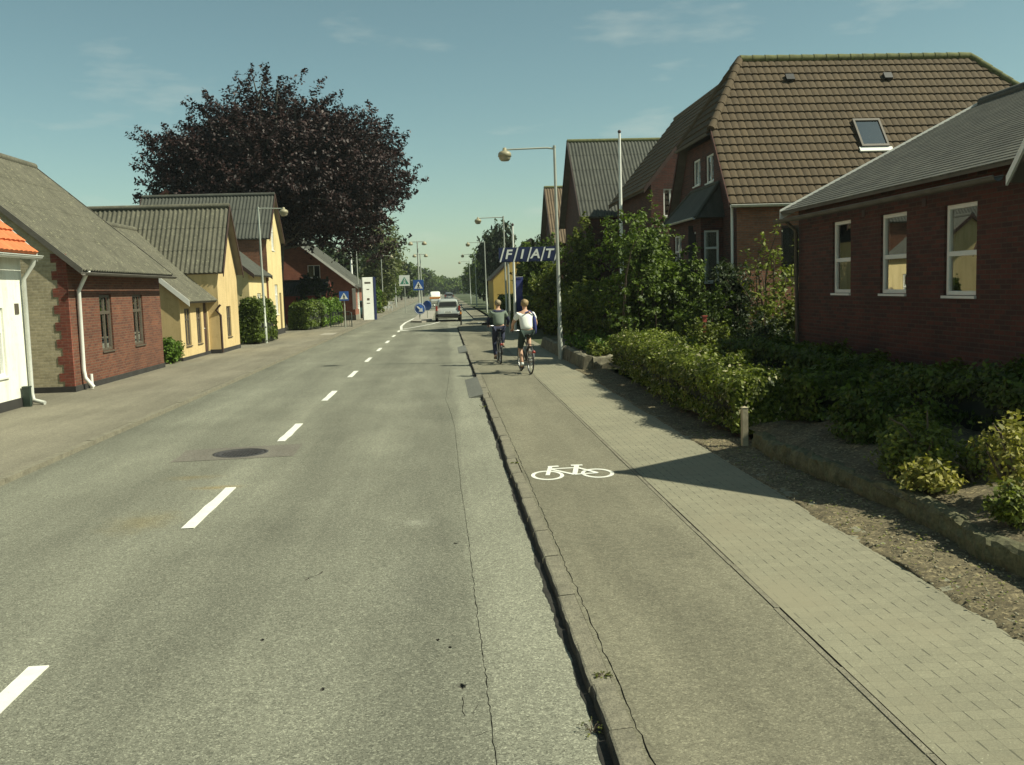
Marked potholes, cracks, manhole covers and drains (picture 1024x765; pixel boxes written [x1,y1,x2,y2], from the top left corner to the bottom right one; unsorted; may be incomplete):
crack [445,371,497,765]
manhole cover [213,448,268,458]
